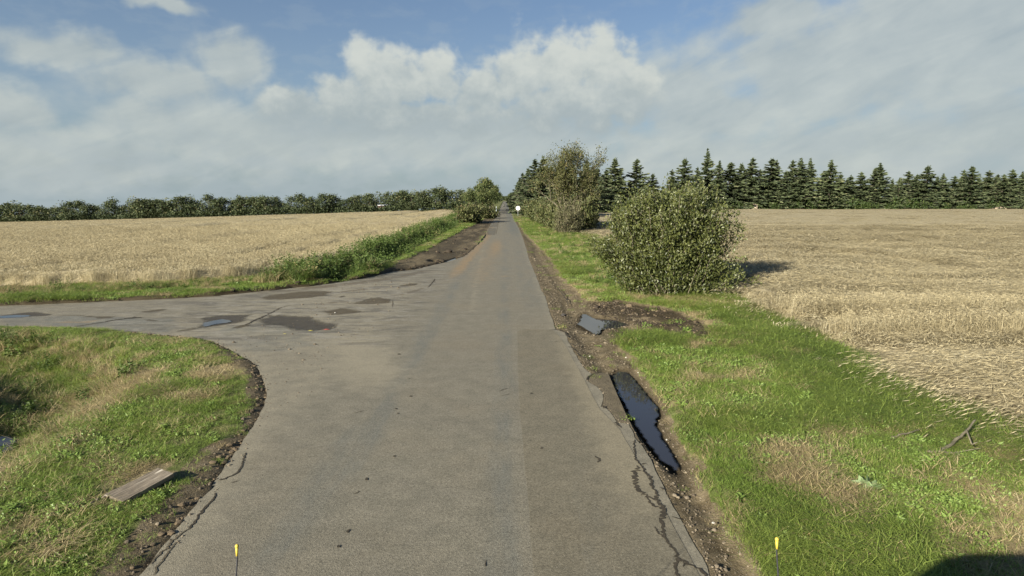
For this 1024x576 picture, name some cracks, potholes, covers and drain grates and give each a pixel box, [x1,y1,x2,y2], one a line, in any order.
crack [603,406,708,576]
crack [150,453,246,575]
